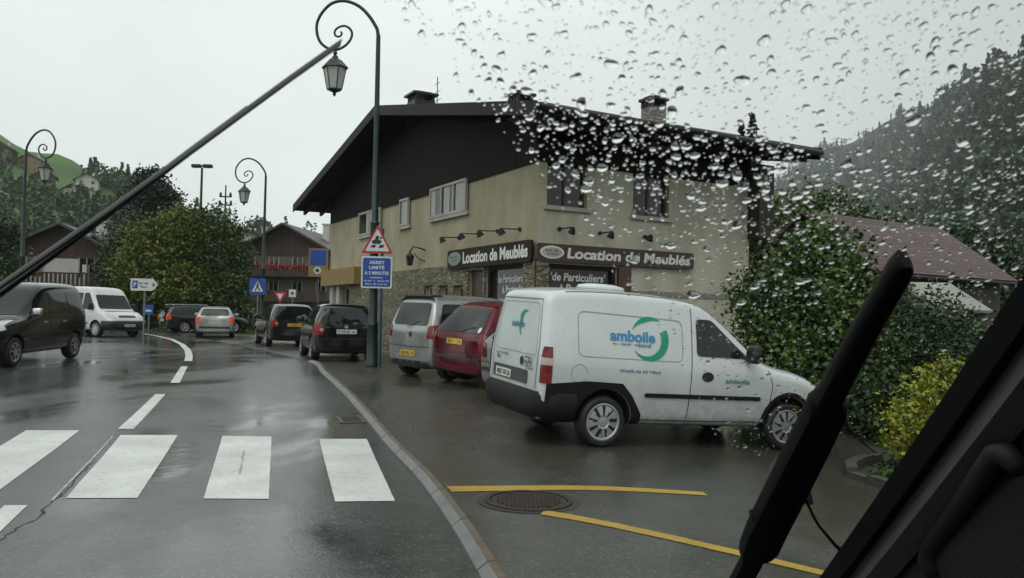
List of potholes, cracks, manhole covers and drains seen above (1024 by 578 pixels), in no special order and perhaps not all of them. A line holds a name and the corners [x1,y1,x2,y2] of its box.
manhole cover [478,490,580,513]
drain grate [335,415,367,423]
